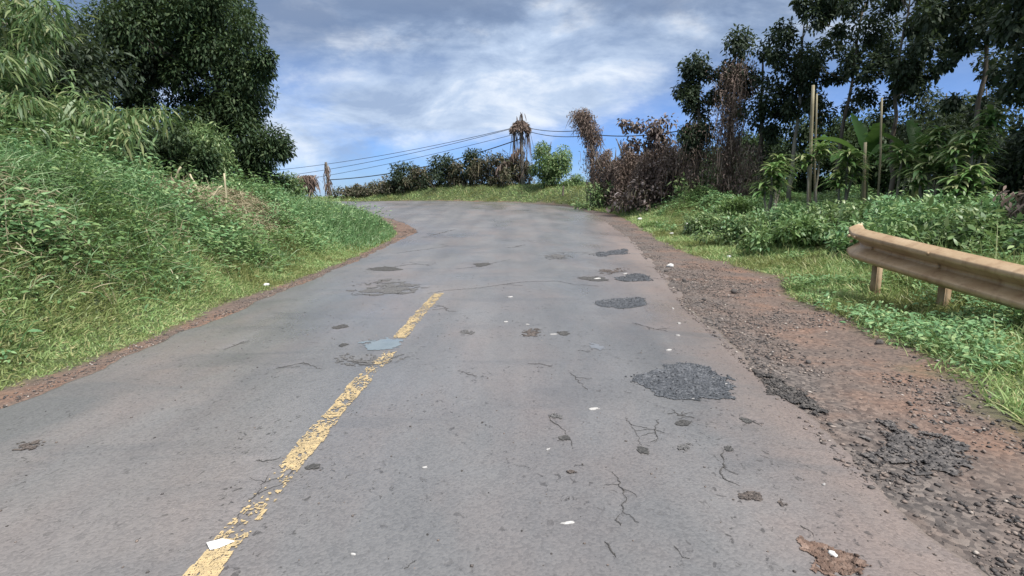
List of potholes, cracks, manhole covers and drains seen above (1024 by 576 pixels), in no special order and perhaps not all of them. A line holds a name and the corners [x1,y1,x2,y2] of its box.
pothole [346,278,430,296]
pothole [796,535,872,576]
pothole [732,491,763,501]
pothole [335,352,417,367]
crack [719,445,738,485]
crack [238,457,293,515]
crack [625,410,694,445]
crack [606,472,637,525]
